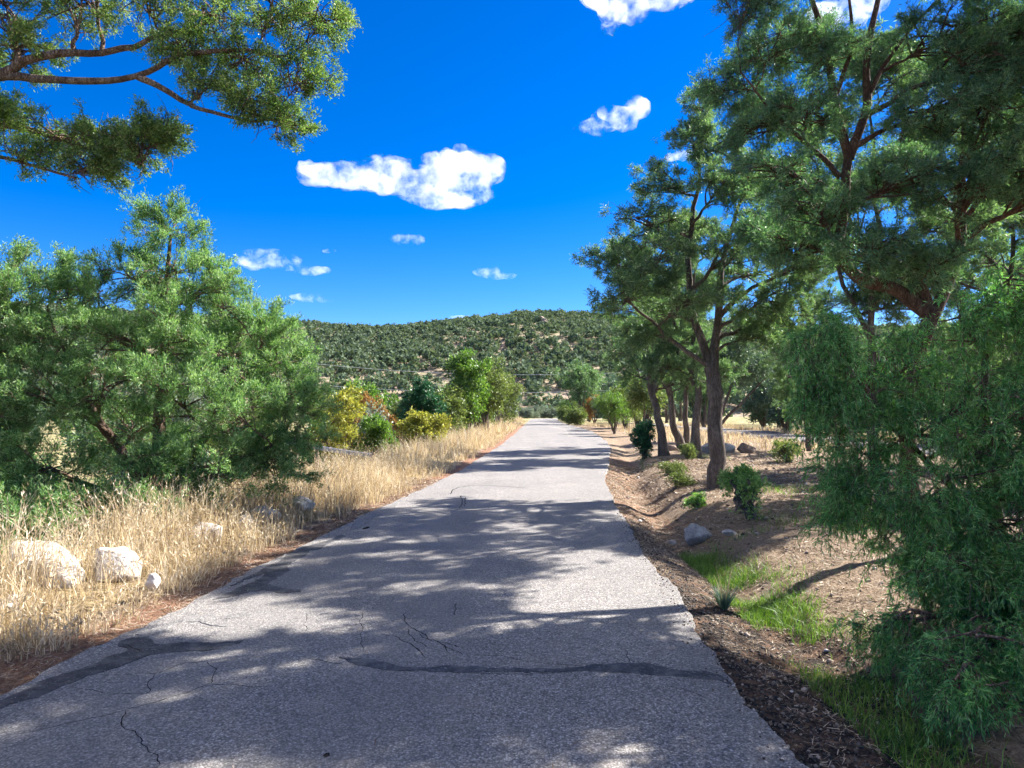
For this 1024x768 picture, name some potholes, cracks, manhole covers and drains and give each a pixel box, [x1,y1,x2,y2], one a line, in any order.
crack [9,661,262,768]
crack [307,611,586,674]
